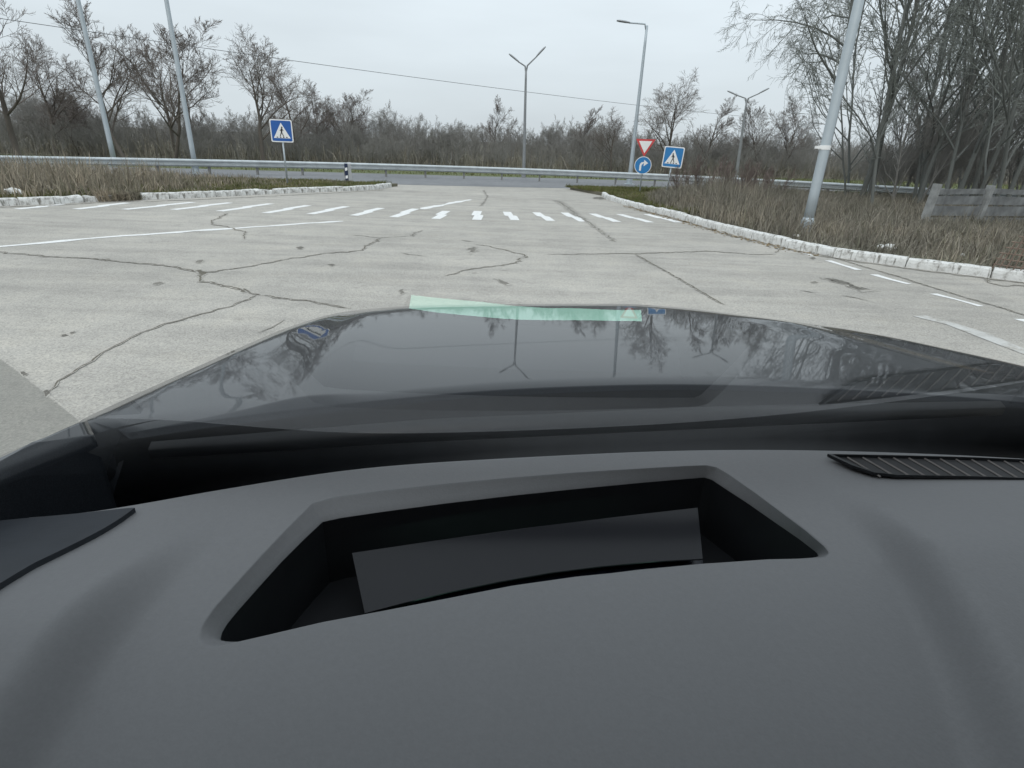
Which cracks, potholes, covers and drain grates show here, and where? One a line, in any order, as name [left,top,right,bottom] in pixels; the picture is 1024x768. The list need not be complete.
crack [0,230,423,393]
crack [445,240,528,276]
